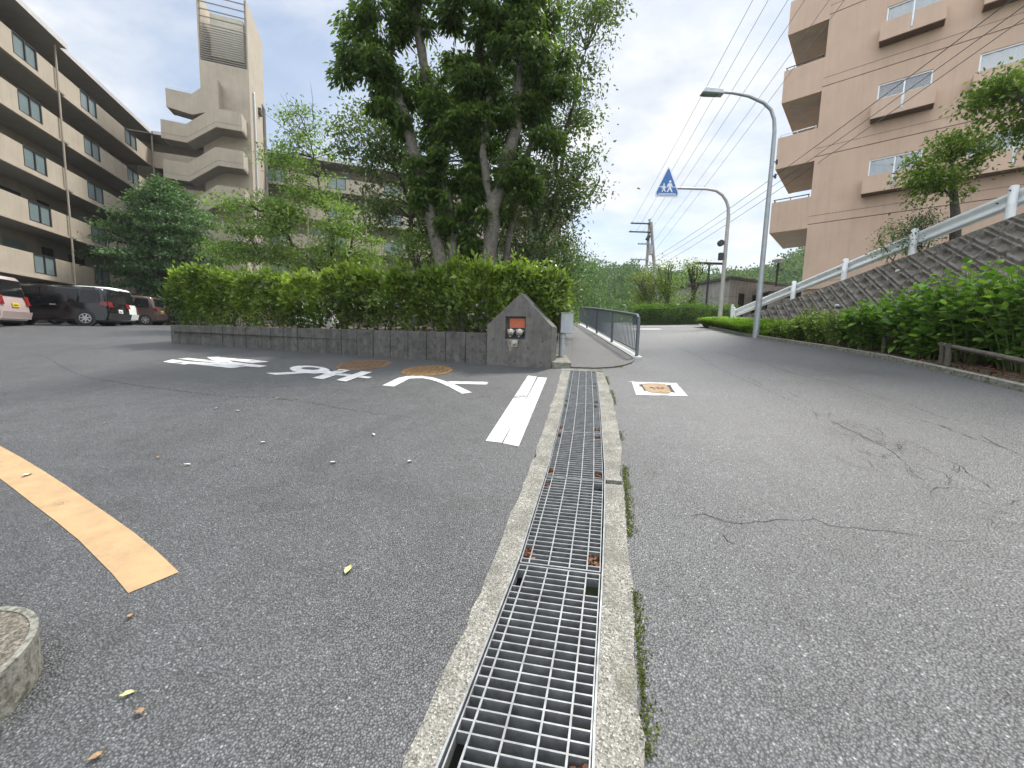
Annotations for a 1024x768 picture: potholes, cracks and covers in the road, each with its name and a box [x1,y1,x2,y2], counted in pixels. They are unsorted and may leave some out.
drain grate [558,403,601,434]
manhole cover [335,360,391,370]
drain grate [442,564,600,768]
drain grate [564,385,599,404]
manhole cover [631,381,687,396]
drain grate [546,431,603,481]
crack [687,512,974,544]
drain grate [568,370,597,386]
manhole cover [400,365,454,376]
crack [683,349,1023,525]
drain grate [520,477,603,574]
